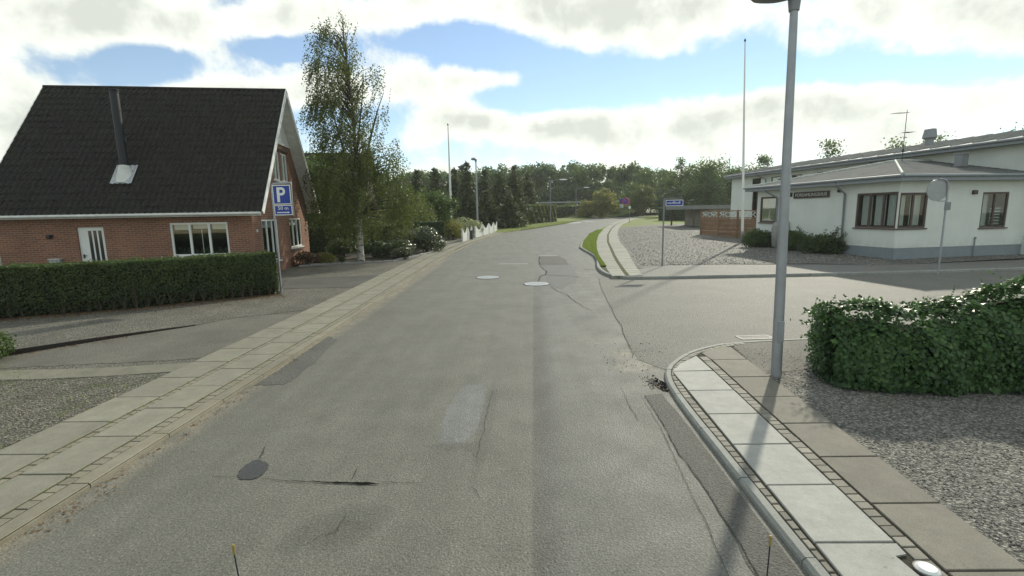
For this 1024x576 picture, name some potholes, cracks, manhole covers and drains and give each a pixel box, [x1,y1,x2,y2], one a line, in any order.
crack [264,469,419,484]
pothole [651,374,669,392]
